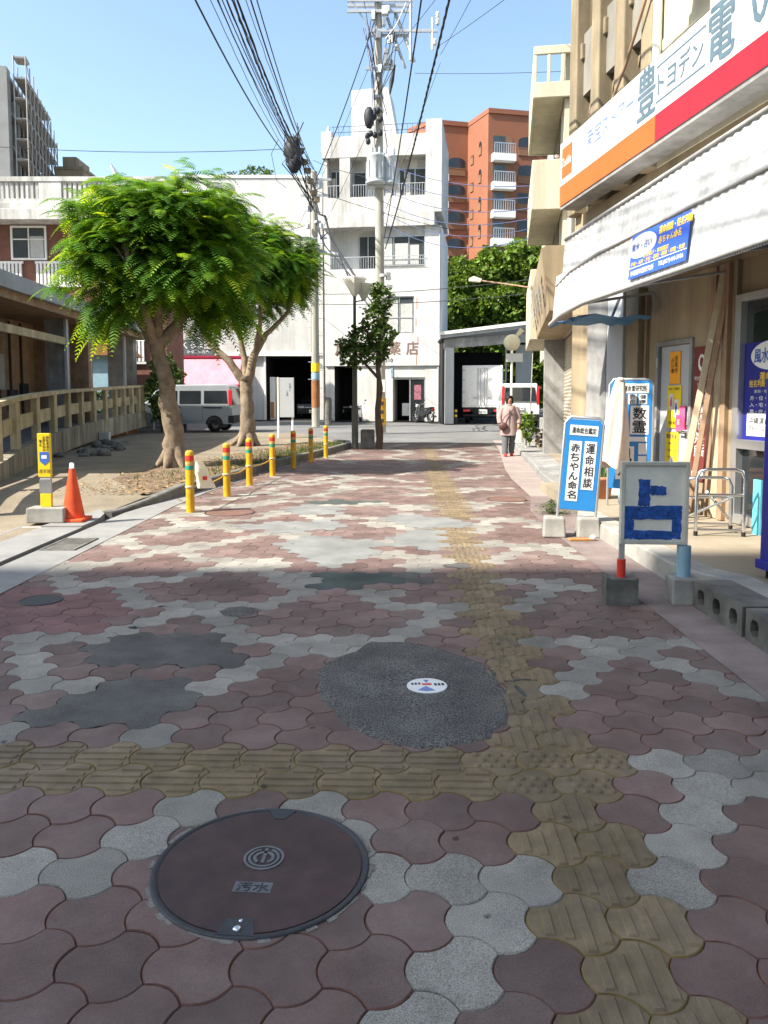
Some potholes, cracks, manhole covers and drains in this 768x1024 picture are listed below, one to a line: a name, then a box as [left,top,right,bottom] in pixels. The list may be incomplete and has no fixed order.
manhole cover [145,808,375,944]
drain grate [39,538,99,551]
manhole cover [18,595,64,606]
